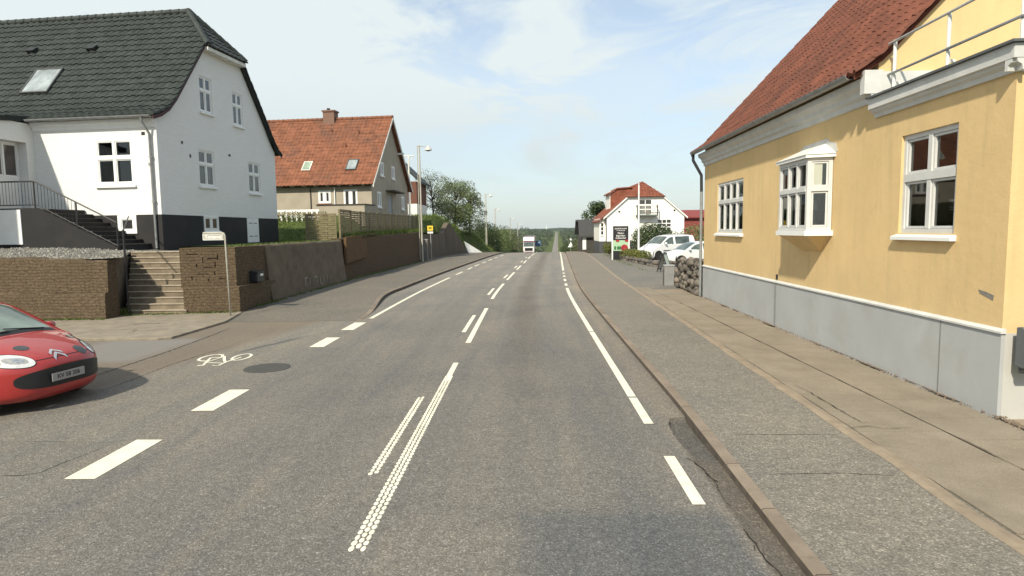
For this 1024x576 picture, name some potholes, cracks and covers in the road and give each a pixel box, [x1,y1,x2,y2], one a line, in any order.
crack [689,459,731,507]
manhole cover [243,363,291,373]
crack [743,528,782,576]
